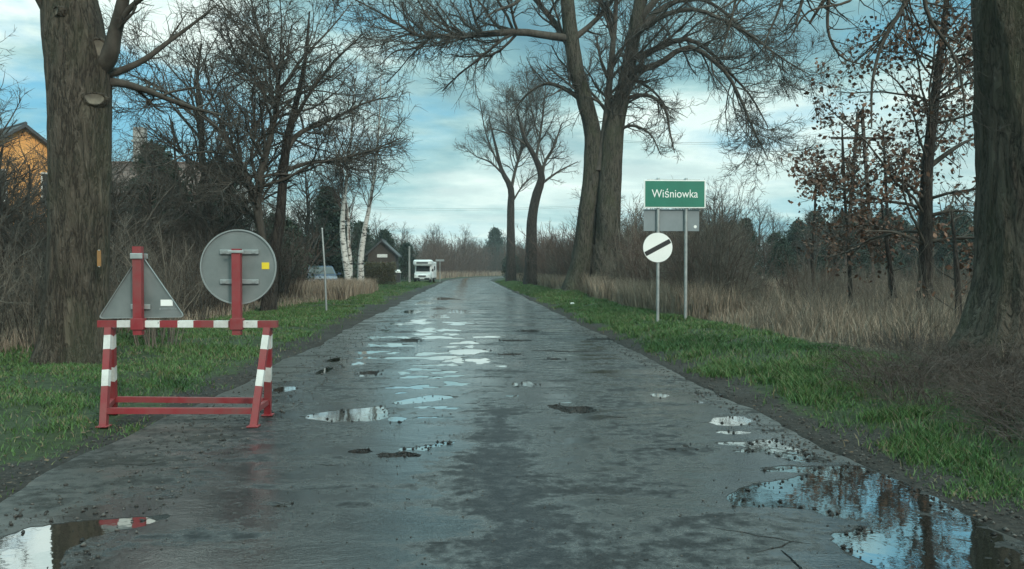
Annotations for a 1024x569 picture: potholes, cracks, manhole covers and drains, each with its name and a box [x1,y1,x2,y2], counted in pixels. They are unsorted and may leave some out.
pothole [299,406,390,422]
pothole [726,464,1024,569]
crack [712,527,808,569]
pothole [715,439,828,463]
pothole [709,416,756,426]
pothole [398,441,456,451]
pothole [0,514,170,569]
pothole [547,404,597,413]
